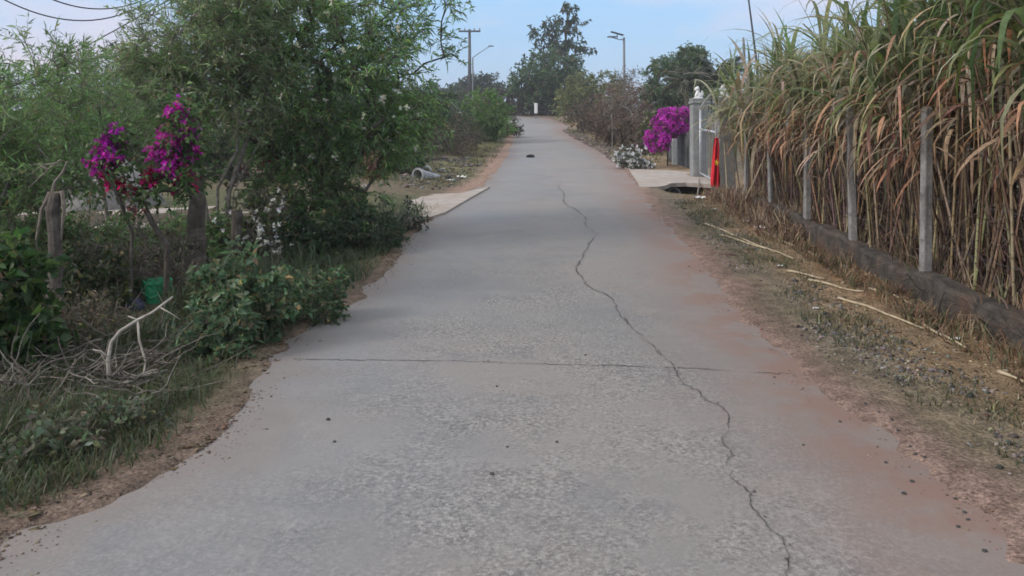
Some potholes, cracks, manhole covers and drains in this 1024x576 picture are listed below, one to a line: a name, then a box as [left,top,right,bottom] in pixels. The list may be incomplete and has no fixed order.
crack [557,186,791,575]
